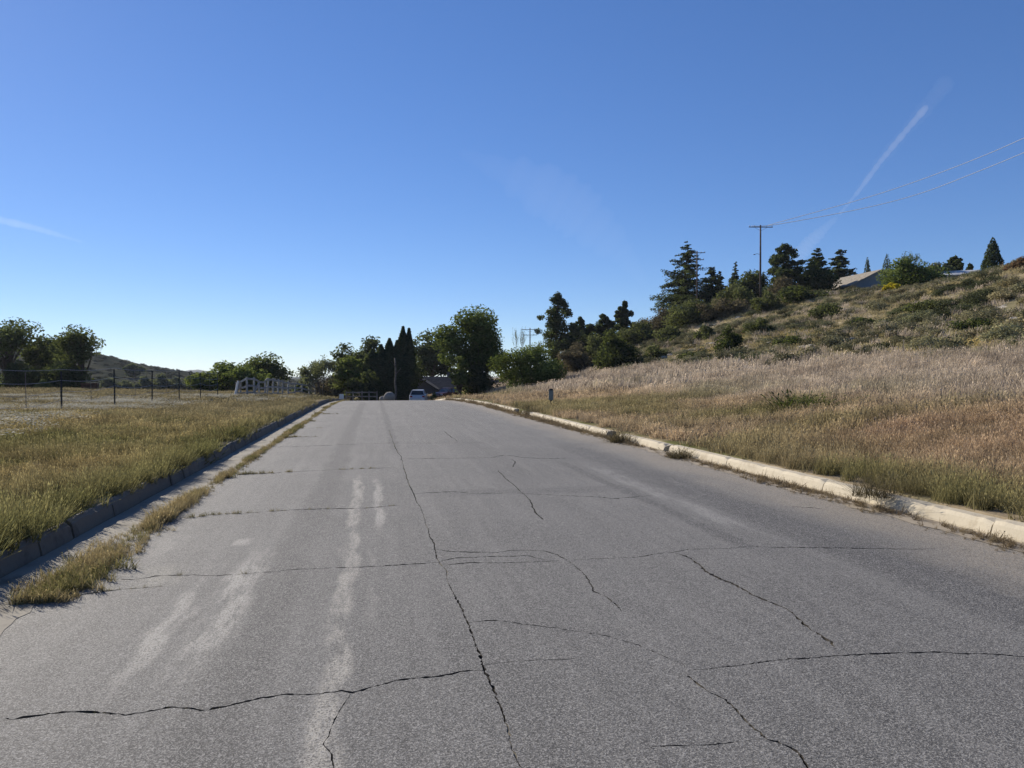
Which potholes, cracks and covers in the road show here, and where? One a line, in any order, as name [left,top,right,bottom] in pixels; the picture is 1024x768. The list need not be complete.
crack [6,439,1024,768]
